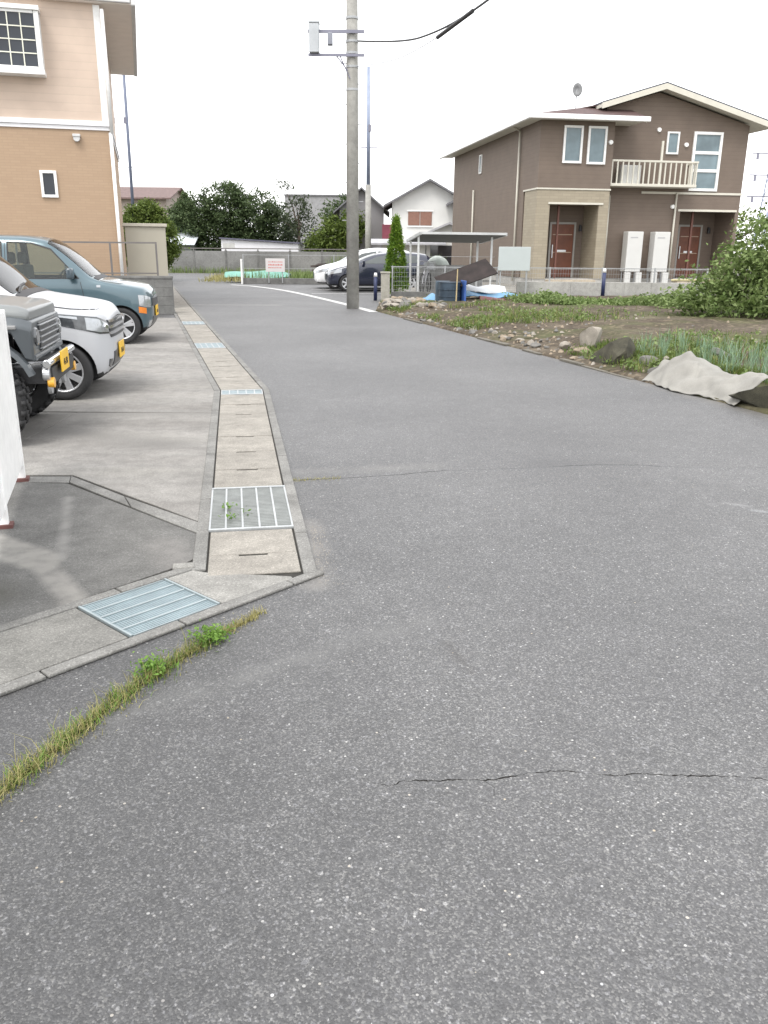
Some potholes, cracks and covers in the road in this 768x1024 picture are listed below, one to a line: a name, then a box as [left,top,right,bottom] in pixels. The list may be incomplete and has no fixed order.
drain grate [208,485,294,533]
drain grate [78,578,220,638]
crack [395,770,764,785]
